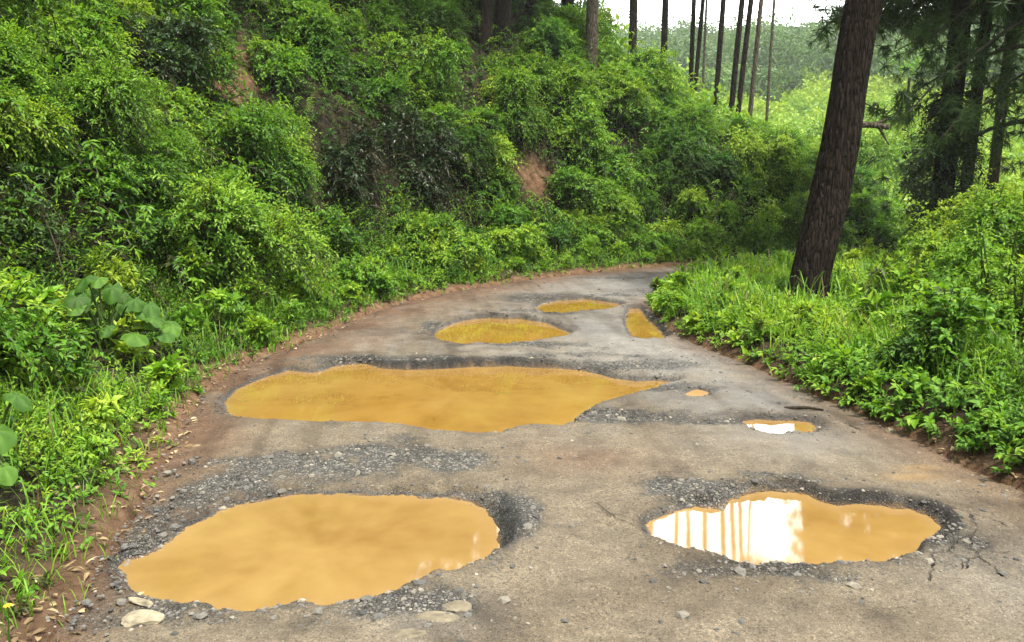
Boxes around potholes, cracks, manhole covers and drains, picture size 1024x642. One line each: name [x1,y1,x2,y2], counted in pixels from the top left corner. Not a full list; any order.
pothole [527,296,629,313]
pothole [619,304,673,338]
pothole [426,312,577,344]
pothole [729,409,832,435]
pothole [629,475,965,566]
pothole [211,355,687,433]
crack [915,502,1024,586]
pothole [100,482,520,612]
pothole [675,383,720,396]
